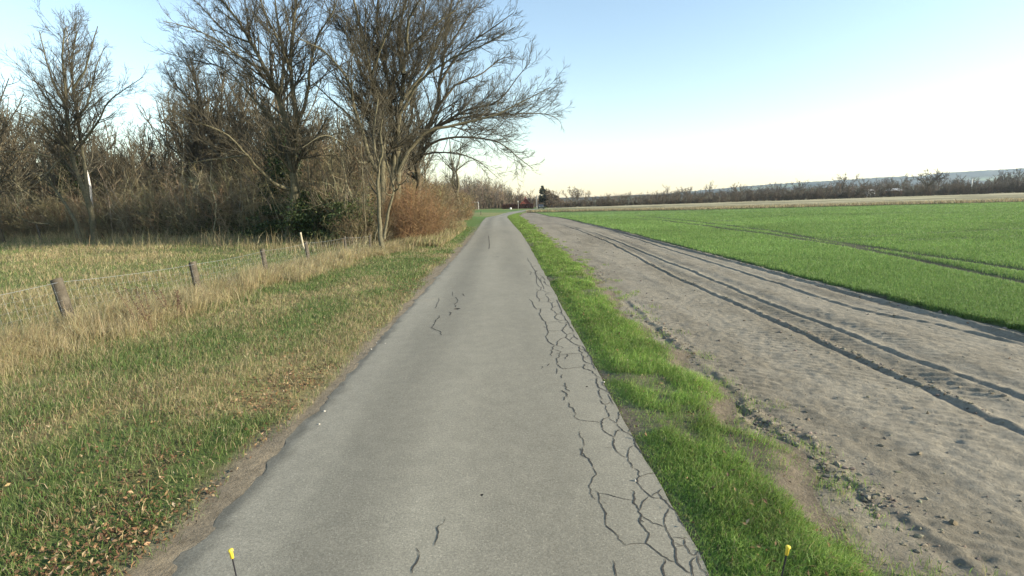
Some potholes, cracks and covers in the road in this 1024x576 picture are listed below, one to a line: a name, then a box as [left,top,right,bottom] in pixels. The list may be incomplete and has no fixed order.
crack [526,260,708,576]
crack [411,520,445,573]
